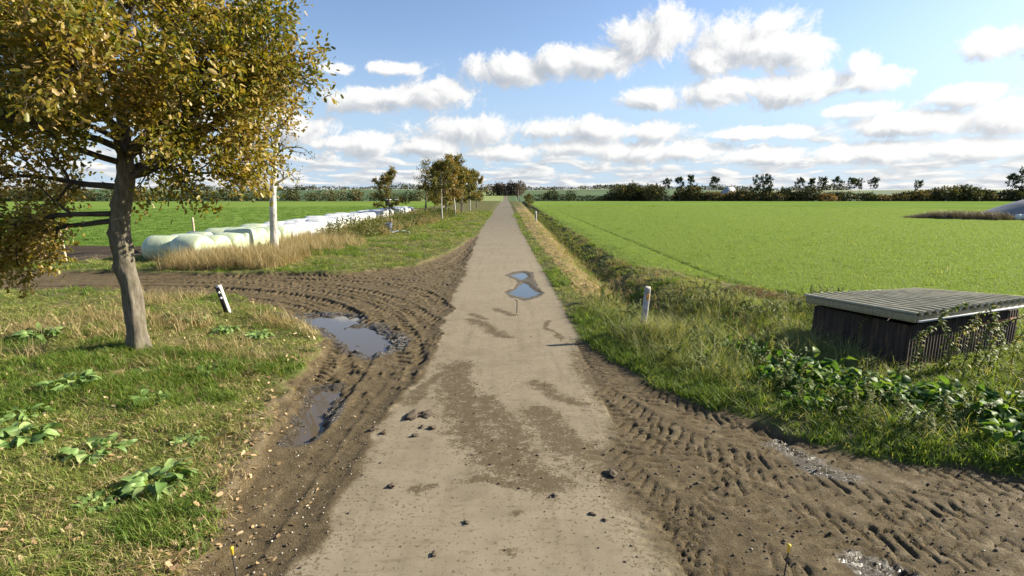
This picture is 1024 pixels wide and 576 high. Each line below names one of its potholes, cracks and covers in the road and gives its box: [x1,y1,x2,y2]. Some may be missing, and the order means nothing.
pothole [503,281,545,298]
pothole [508,272,532,280]
